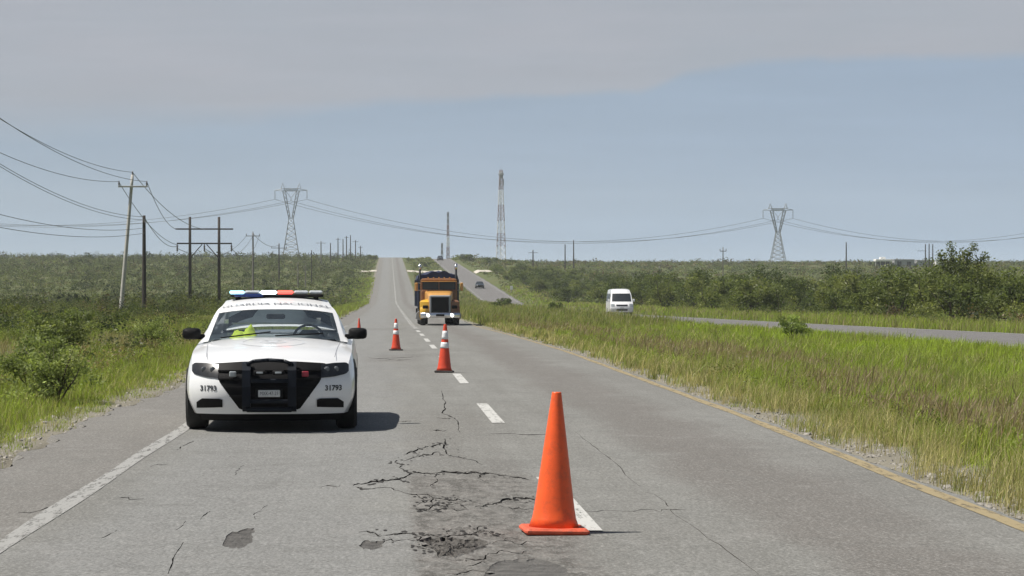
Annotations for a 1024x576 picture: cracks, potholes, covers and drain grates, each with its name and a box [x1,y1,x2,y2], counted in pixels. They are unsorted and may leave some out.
crack [168,511,210,574]
crack [322,385,541,575]
pothole [418,537,491,558]
